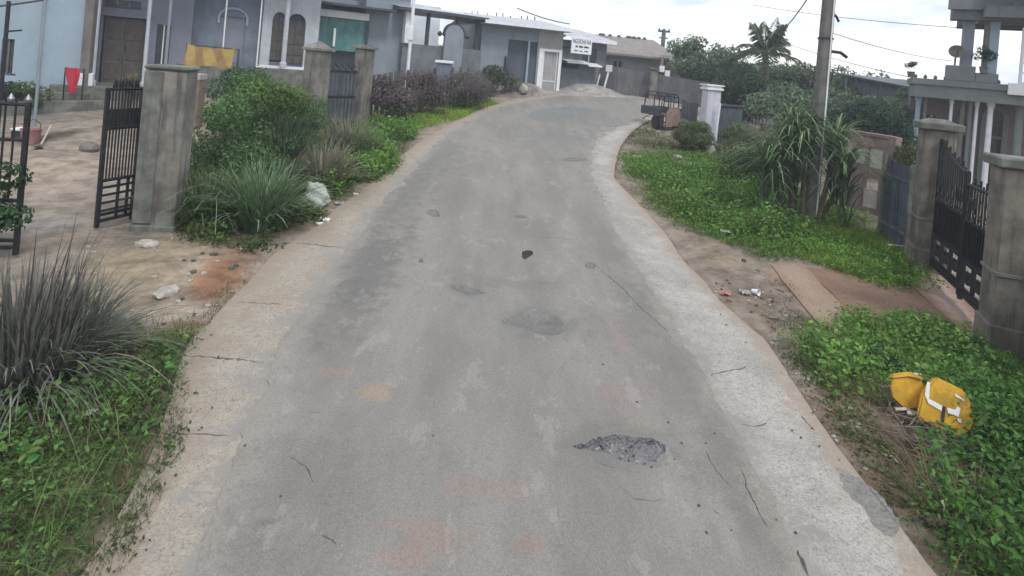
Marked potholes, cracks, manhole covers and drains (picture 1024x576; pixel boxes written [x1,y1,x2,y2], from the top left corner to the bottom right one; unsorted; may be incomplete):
pothole [572,434,666,465]
crack [705,450,767,526]
crack [797,552,809,576]
